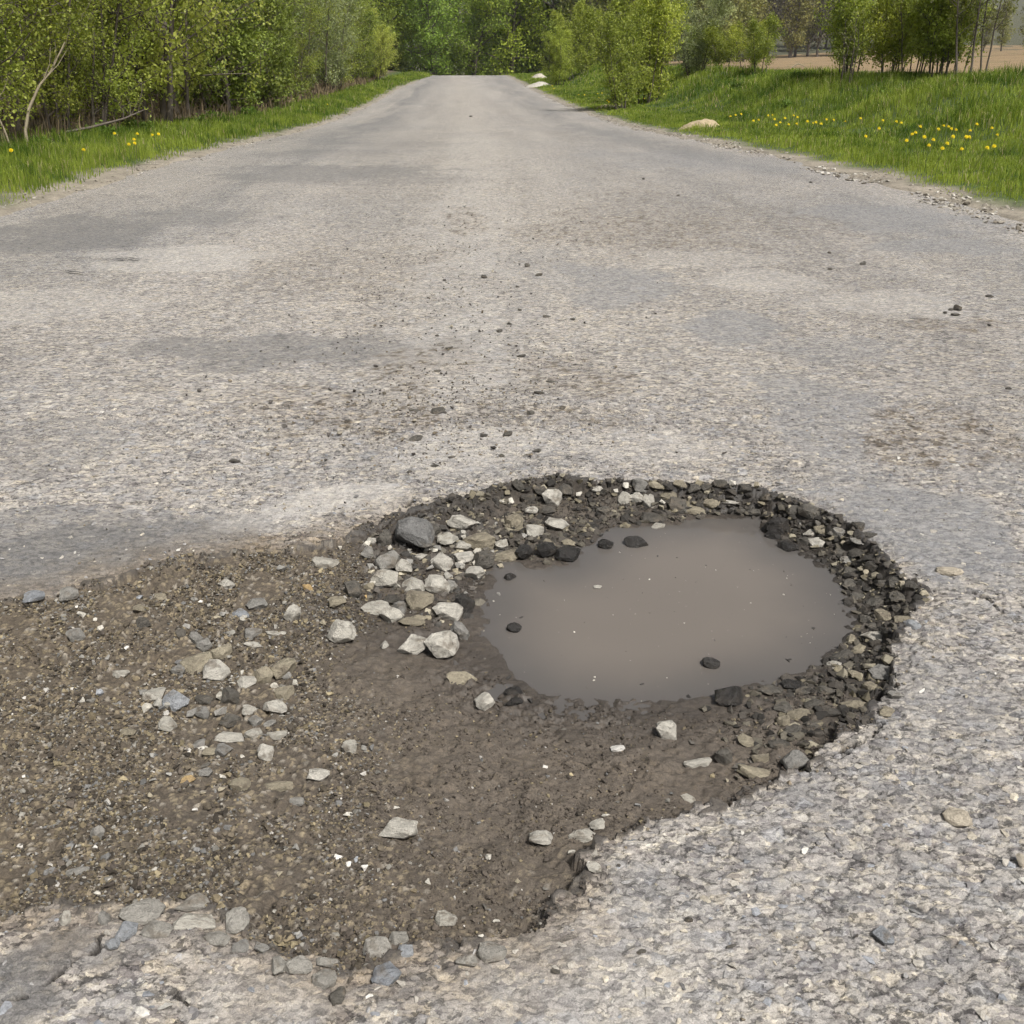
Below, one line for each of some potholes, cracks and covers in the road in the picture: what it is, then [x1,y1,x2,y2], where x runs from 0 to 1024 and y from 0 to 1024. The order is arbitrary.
pothole [0,474,932,981]
